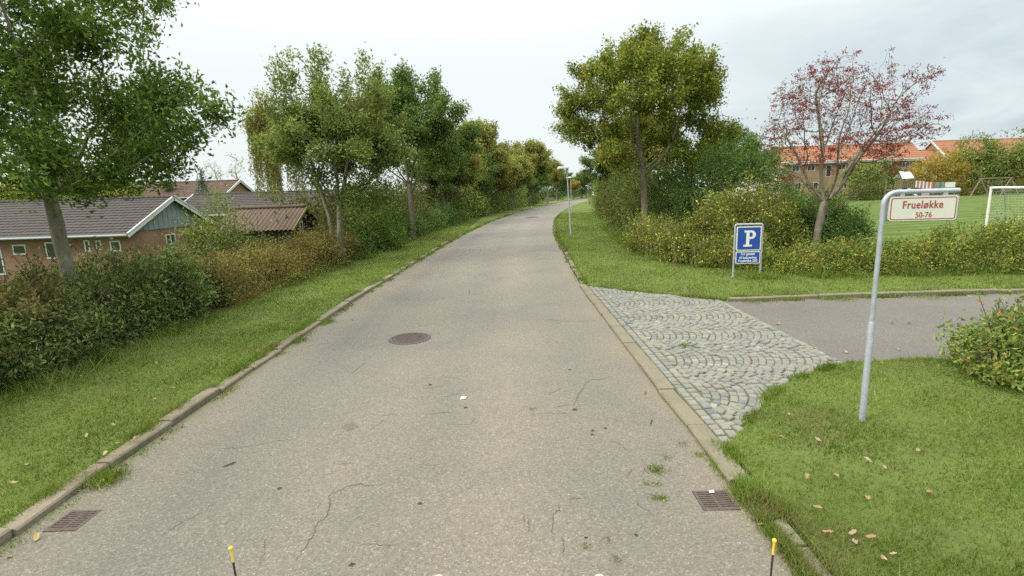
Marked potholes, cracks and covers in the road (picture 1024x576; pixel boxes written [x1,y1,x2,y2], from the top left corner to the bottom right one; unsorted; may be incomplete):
manhole cover [388,332,431,345]
drain grate [692,490,741,511]
drain grate [43,510,101,532]
crack [296,483,369,560]
